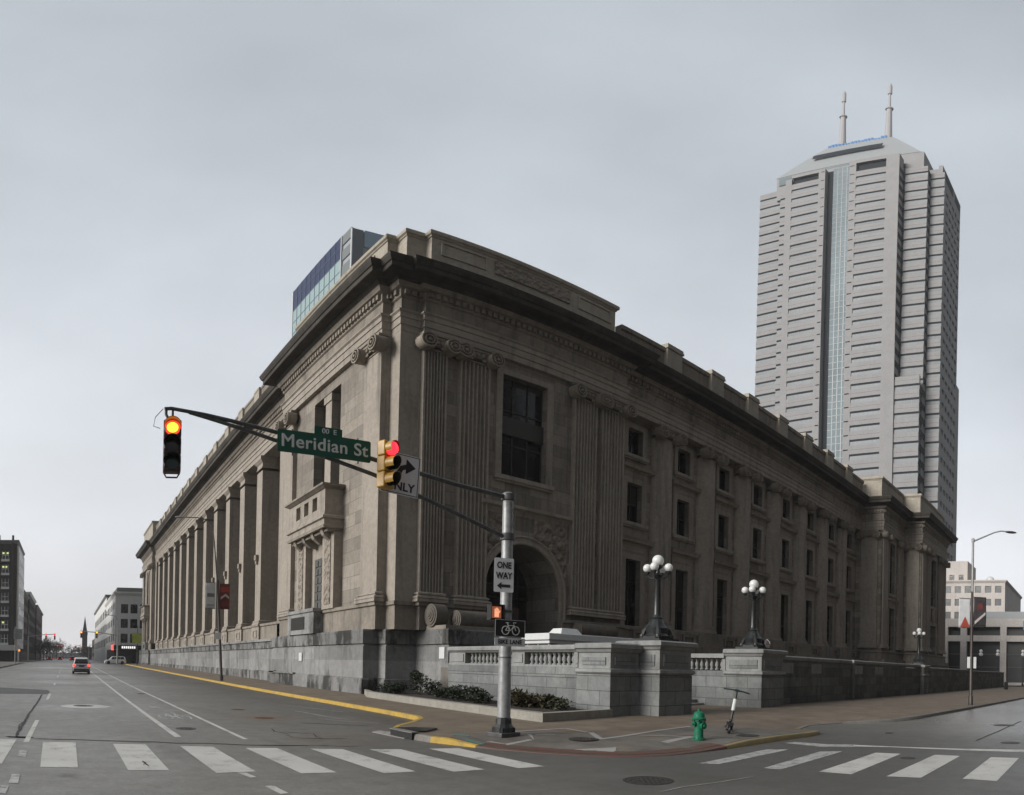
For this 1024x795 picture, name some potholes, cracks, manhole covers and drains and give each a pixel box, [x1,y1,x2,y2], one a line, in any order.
crack [271,722,365,746]
manhole cover [623,776,674,785]
